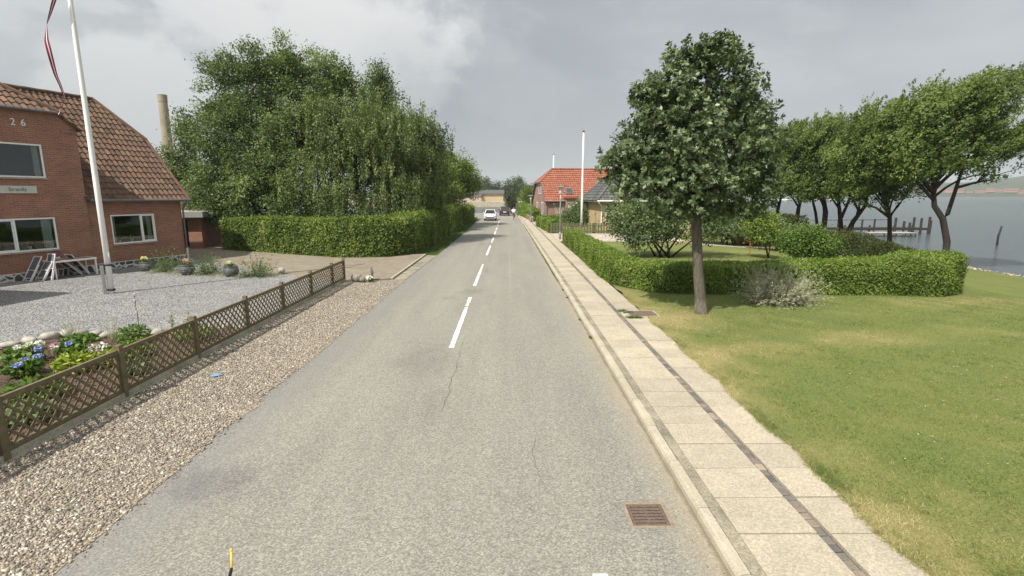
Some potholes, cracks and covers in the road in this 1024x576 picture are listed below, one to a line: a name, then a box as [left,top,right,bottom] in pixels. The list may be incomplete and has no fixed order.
drain grate [622,502,675,528]
